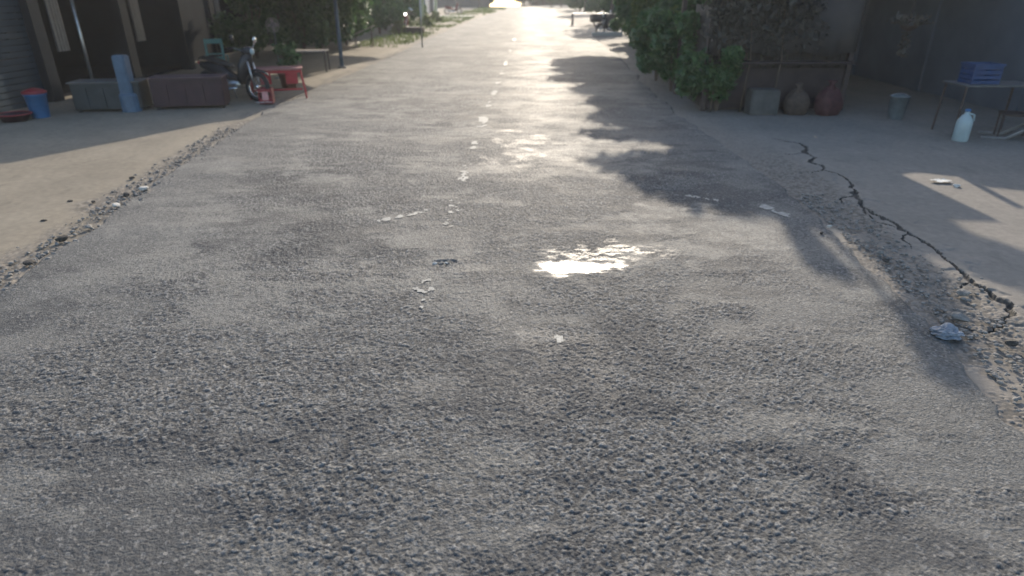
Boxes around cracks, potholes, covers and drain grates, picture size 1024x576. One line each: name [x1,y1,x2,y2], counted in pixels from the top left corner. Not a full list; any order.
crack [773,138,1017,334]
pothole [431,259,457,268]
